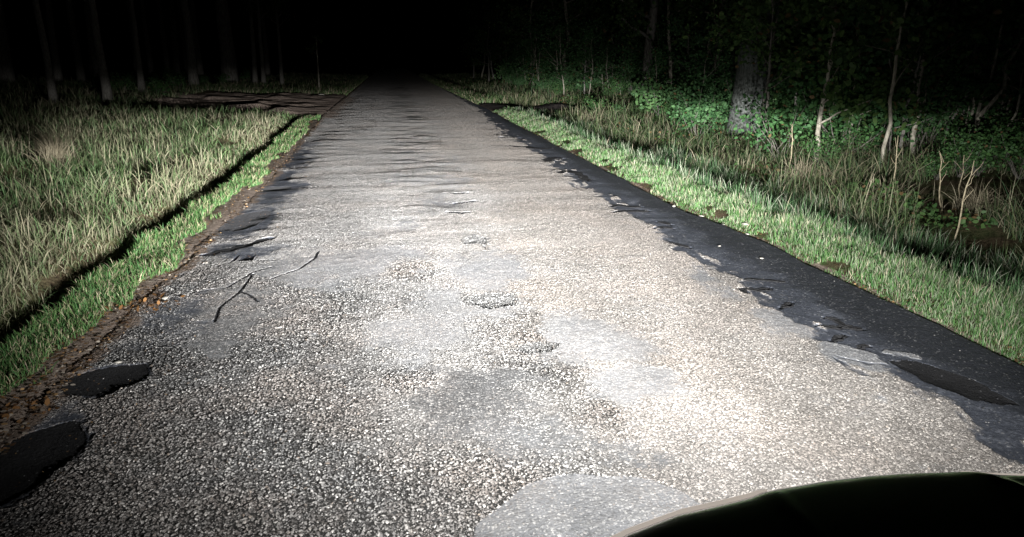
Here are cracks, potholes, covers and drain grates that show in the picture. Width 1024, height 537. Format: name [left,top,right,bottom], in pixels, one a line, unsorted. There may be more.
pothole [465,292,521,310]
pothole [0,419,87,505]
pothole [61,364,150,397]
pothole [510,341,561,354]
pothole [888,359,1019,406]
crack [178,238,333,322]
pothole [460,234,491,247]
